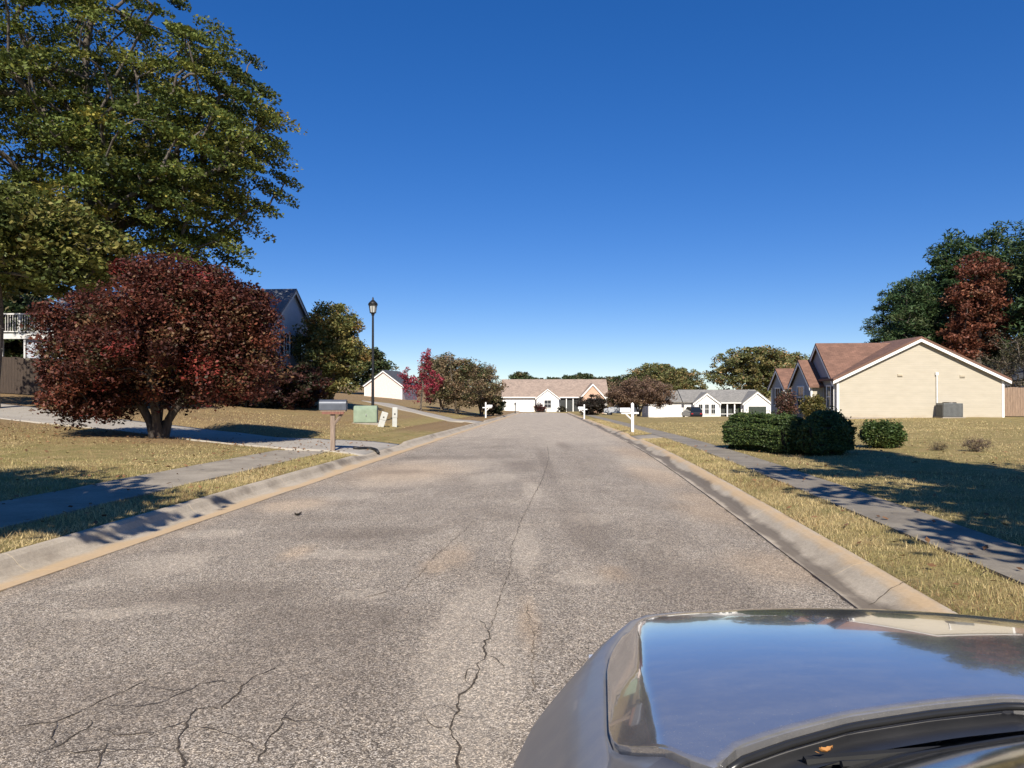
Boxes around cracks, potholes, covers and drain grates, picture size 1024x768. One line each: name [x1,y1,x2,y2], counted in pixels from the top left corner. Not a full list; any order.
crack [0,665,316,768]
crack [367,522,472,597]
crack [423,452,549,768]
